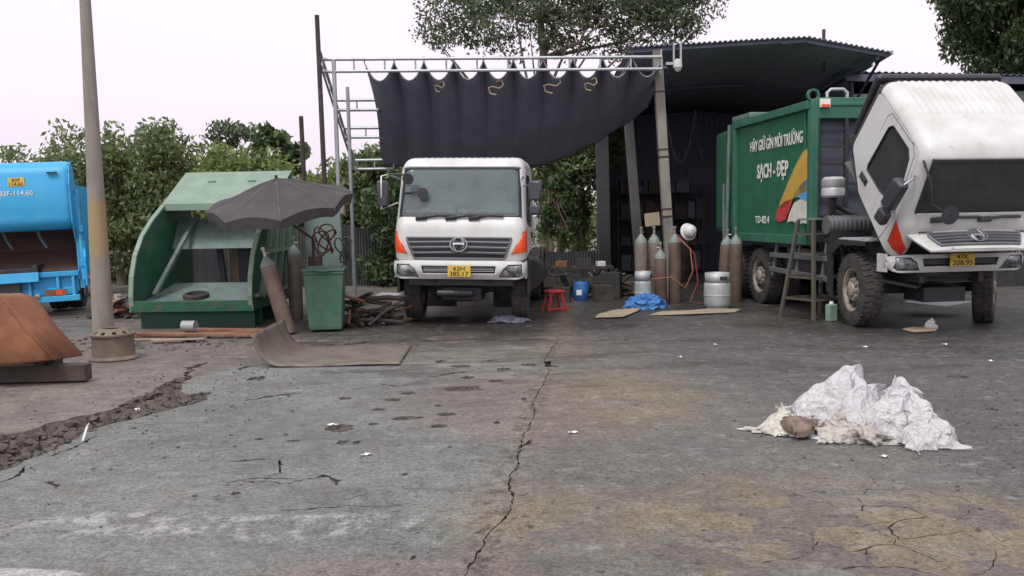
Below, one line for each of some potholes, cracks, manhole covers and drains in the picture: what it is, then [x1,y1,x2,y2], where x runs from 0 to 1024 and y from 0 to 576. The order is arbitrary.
crack [225,459,397,511]
pothole [325,424,355,432]
crack [759,486,1008,576]
pothole [0,376,212,471]
